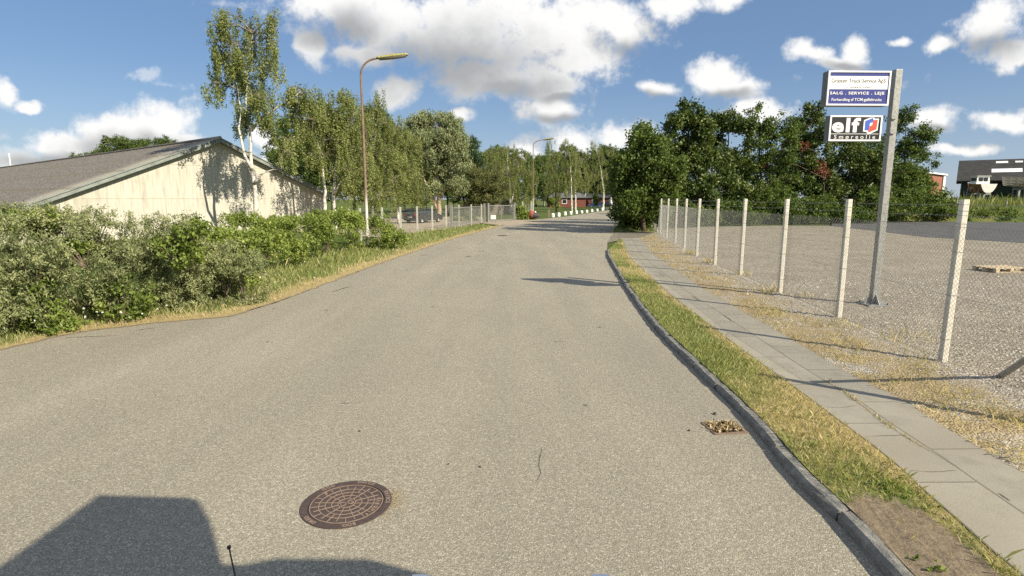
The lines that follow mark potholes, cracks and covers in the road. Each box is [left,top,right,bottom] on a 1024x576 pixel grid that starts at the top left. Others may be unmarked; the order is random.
drain grate [701,421,749,435]
manhole cover [300,481,392,529]
